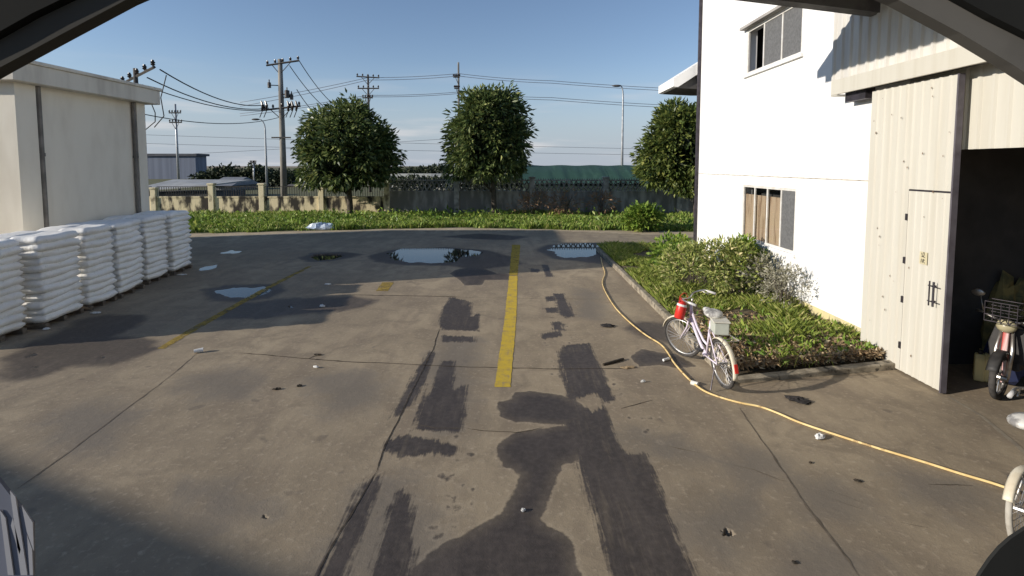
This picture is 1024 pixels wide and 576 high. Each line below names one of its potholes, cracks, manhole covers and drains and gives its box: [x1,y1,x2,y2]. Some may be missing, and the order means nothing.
pothole [295,253,354,261]
